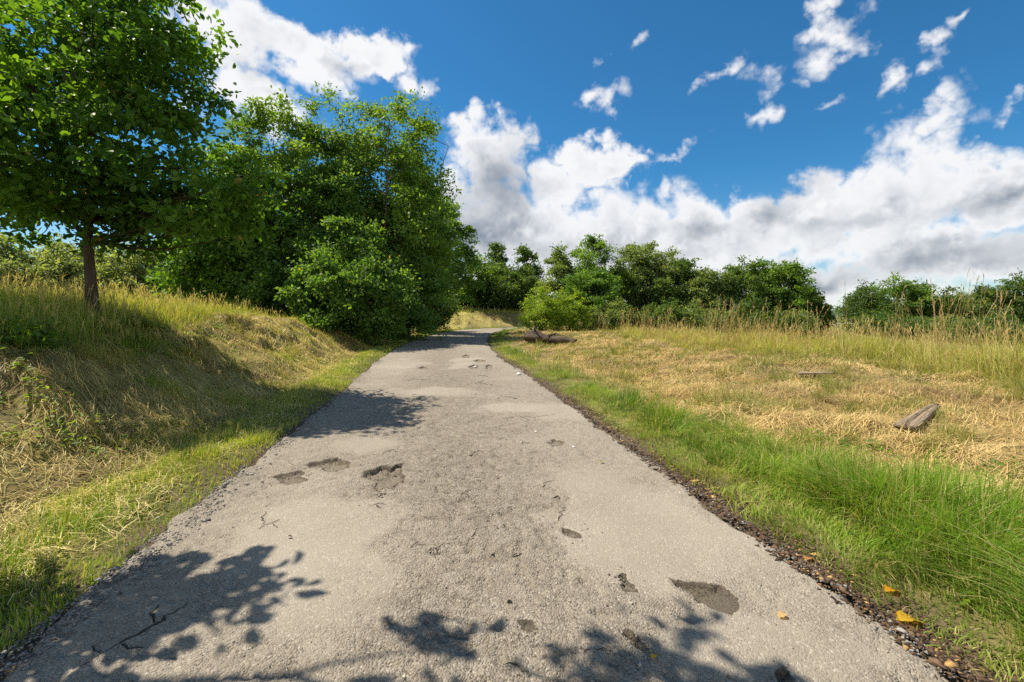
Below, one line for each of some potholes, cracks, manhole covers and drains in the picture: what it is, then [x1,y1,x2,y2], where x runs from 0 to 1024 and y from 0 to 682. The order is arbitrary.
pothole [354,462,413,497]
crack [81,602,188,667]
pothole [608,569,650,600]
pothole [660,575,750,621]
pothole [298,456,359,476]
crack [259,511,280,529]
pothole [538,438,571,449]
pothole [550,524,589,543]
